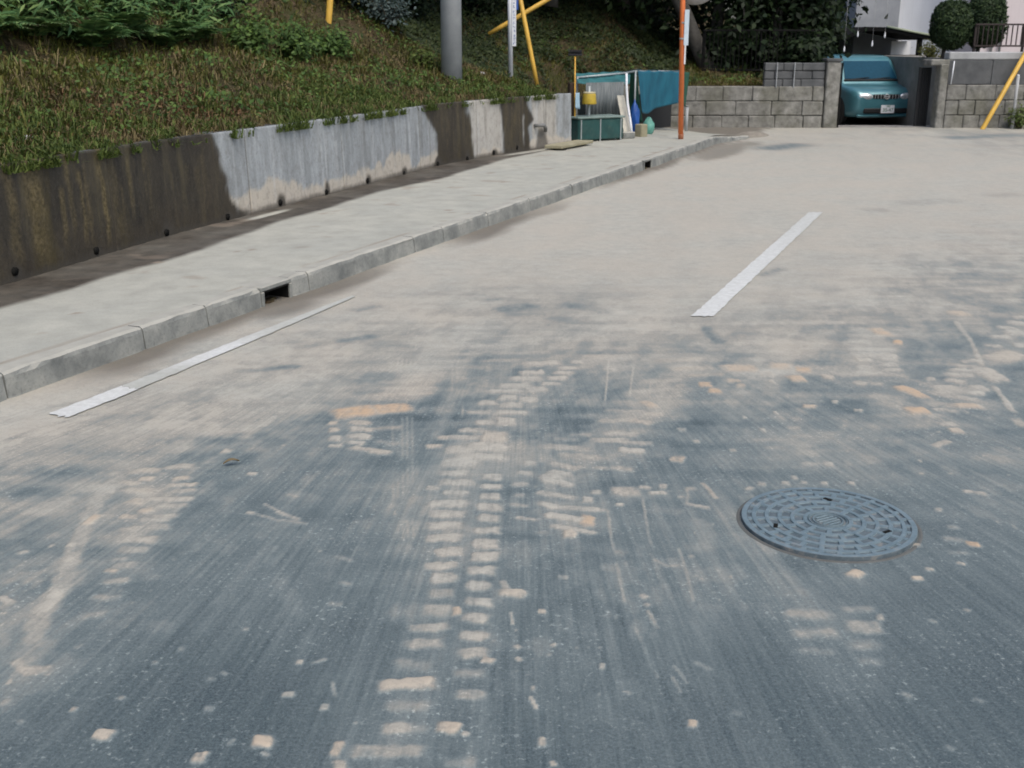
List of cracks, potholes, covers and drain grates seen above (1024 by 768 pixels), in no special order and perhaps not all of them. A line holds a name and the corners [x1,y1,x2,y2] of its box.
drain grate [240,276,293,307]
manhole cover [736,487,923,564]
drain grate [633,157,652,170]
